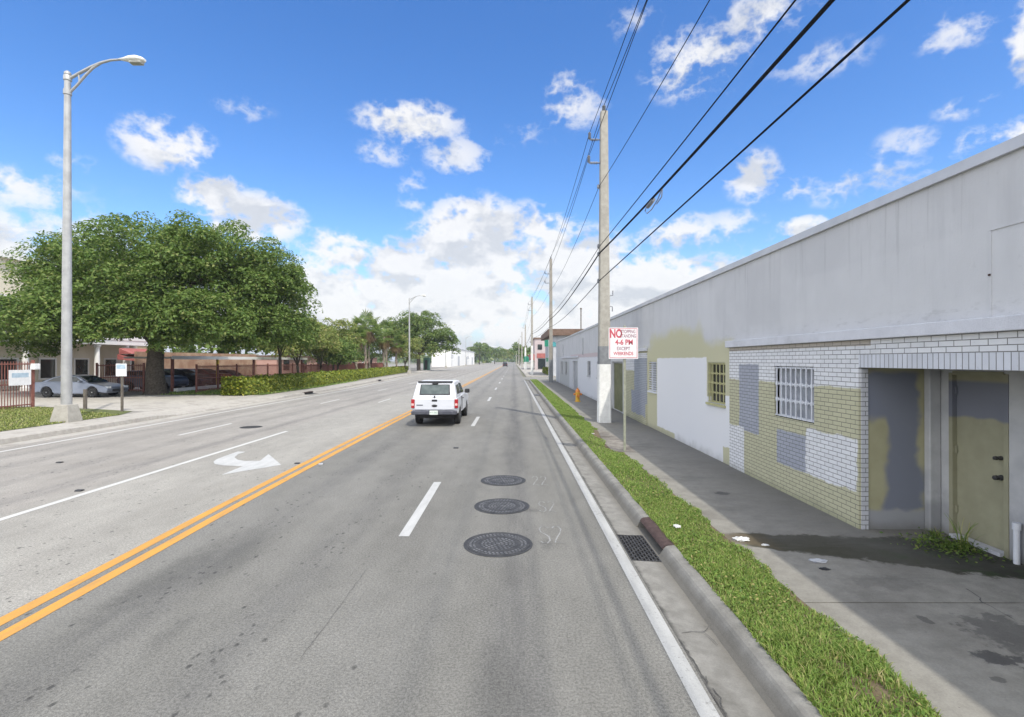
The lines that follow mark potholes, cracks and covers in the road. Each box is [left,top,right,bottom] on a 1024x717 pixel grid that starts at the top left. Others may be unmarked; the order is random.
manhole cover [463,532,533,557]
manhole cover [474,498,529,514]
manhole cover [481,475,526,486]
drain grate [617,535,662,562]
